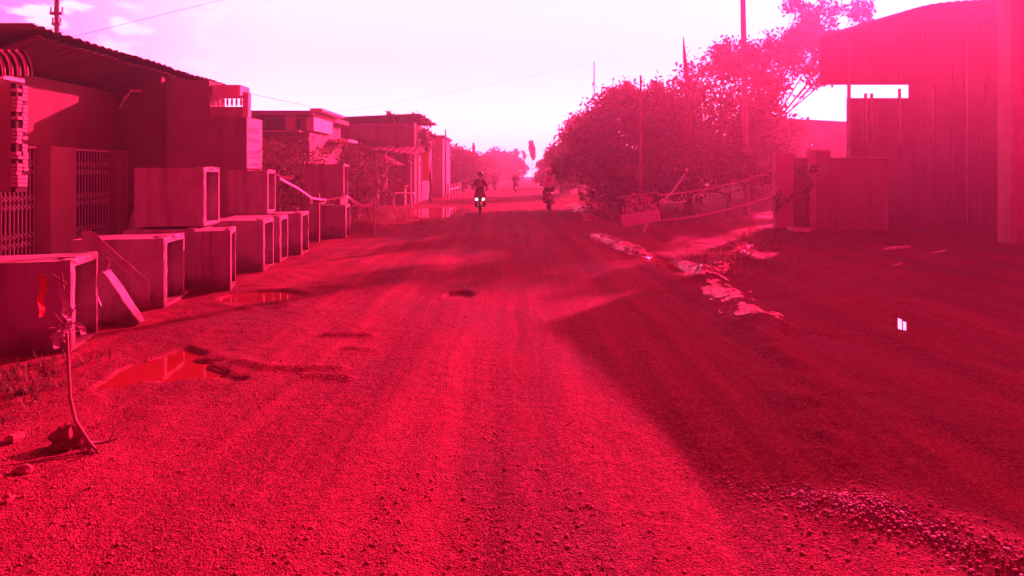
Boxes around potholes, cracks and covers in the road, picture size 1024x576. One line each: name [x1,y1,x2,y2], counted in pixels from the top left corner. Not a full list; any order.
pothole [442,290,475,299]
pothole [219,290,307,303]
pothole [89,347,245,390]
